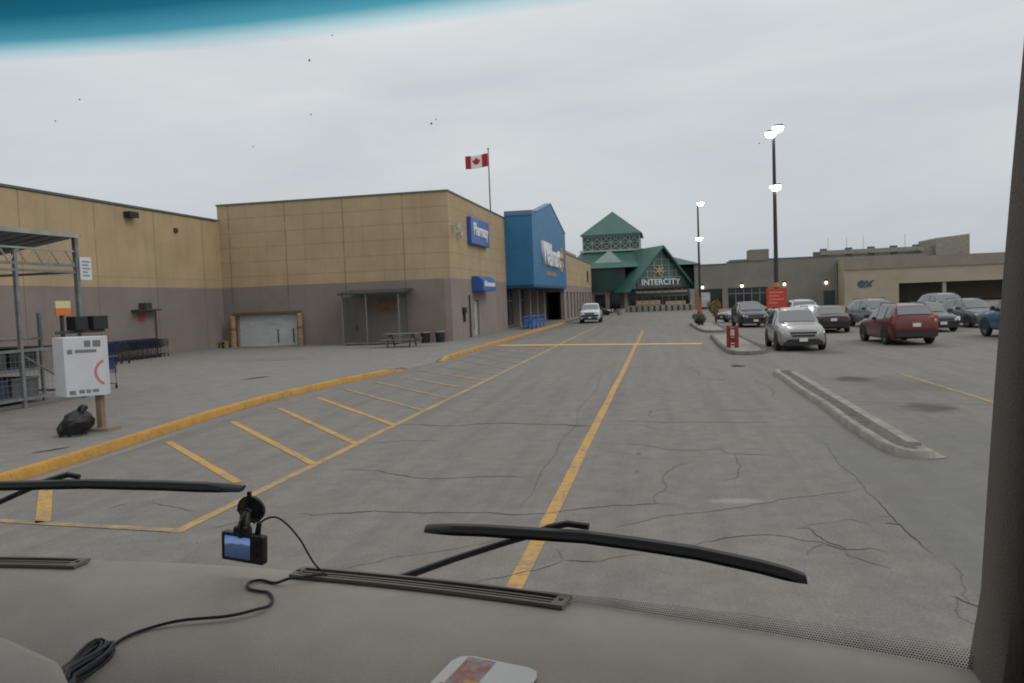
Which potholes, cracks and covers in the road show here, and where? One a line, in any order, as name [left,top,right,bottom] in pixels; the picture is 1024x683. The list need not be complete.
crack [471,550,641,583]
crack [294,460,856,527]
crack [617,410,764,481]
crack [952,563,978,624]
crack [695,519,889,568]
crack [377,423,586,443]
crack [345,538,500,569]
